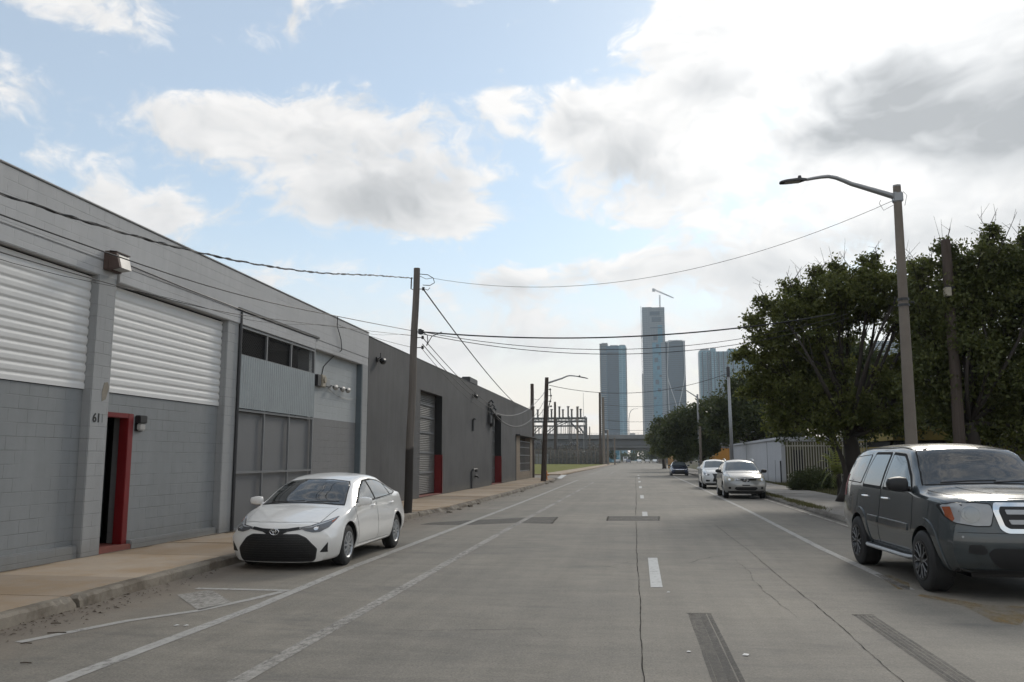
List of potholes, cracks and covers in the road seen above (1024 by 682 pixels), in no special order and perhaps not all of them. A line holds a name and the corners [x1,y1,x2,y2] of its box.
crack [717,526,904,682]
